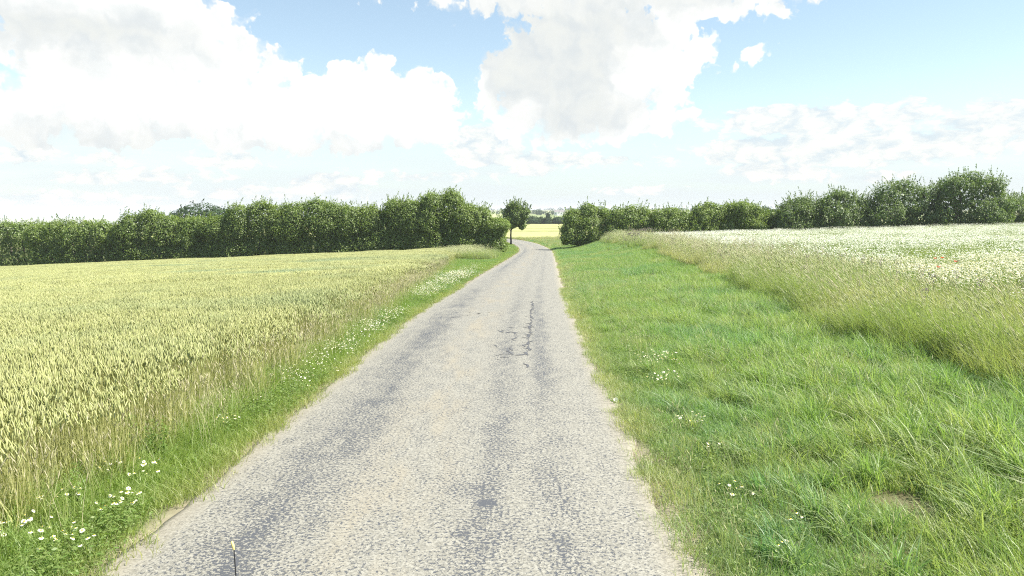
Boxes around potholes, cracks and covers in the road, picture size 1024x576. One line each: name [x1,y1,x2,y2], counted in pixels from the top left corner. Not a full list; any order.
crack [495,302,534,367]
